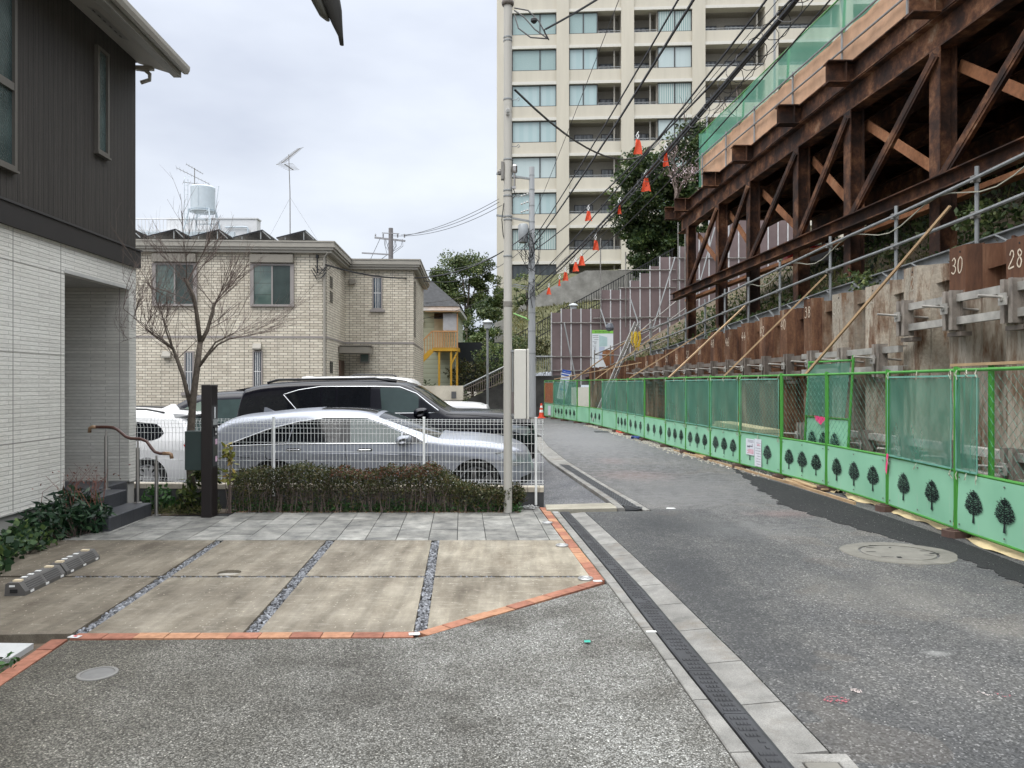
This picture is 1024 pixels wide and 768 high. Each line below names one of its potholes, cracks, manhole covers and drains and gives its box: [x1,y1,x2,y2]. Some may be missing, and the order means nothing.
manhole cover [839,542,958,565]
manhole cover [76,666,119,681]
